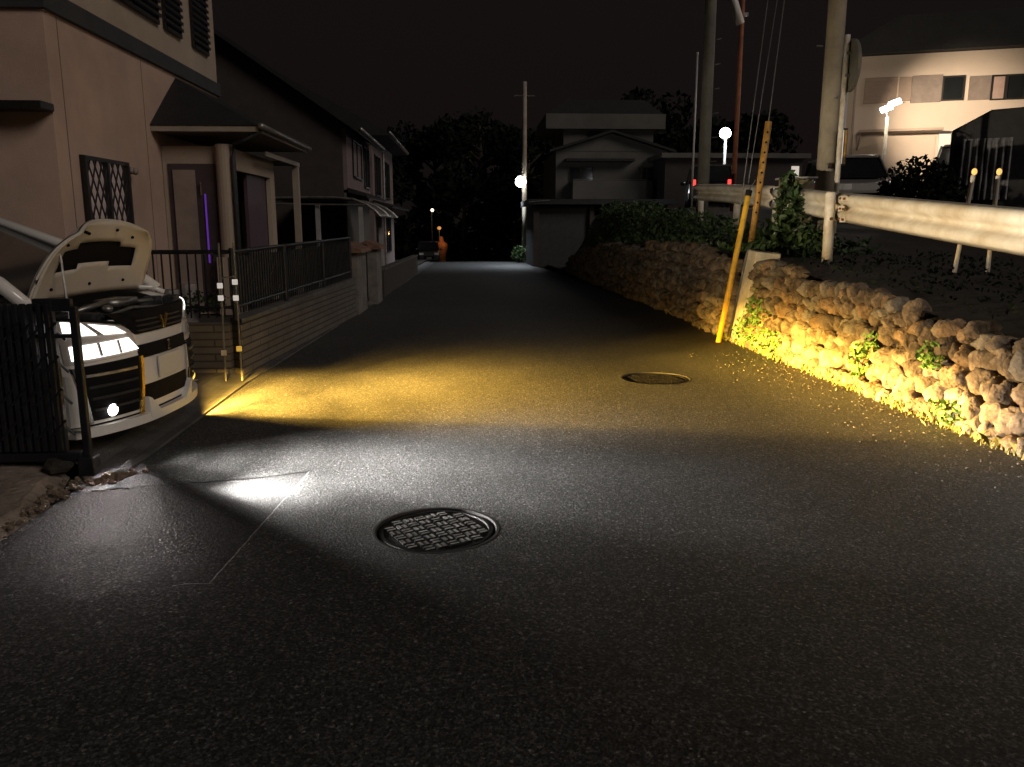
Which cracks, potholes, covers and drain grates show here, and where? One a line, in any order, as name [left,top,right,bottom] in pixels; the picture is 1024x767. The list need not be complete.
manhole cover [620,372,691,385]
pothole [84,468,149,492]
manhole cover [372,507,500,554]
